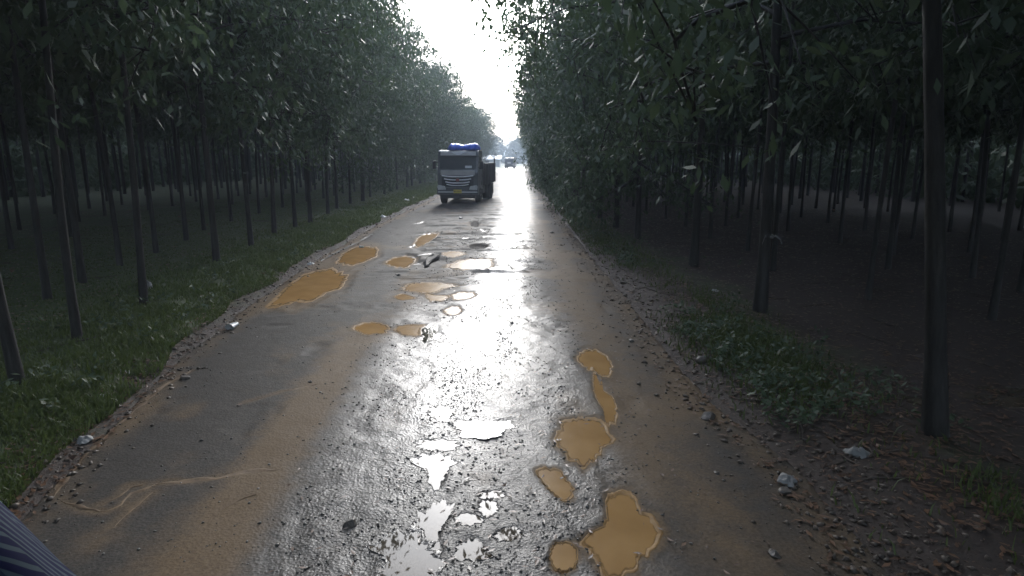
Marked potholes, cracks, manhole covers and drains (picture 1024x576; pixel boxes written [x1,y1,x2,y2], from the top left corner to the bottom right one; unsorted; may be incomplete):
pothole [535,466,575,502]
pothole [413,233,439,248]
pothole [385,256,416,268]
pothole [576,349,614,378]
pothole [579,489,663,576]
pothole [401,282,457,293]
pothole [554,416,616,470]
pothole [335,246,379,266]
pothole [265,267,349,309]
pothole [445,258,494,271]
